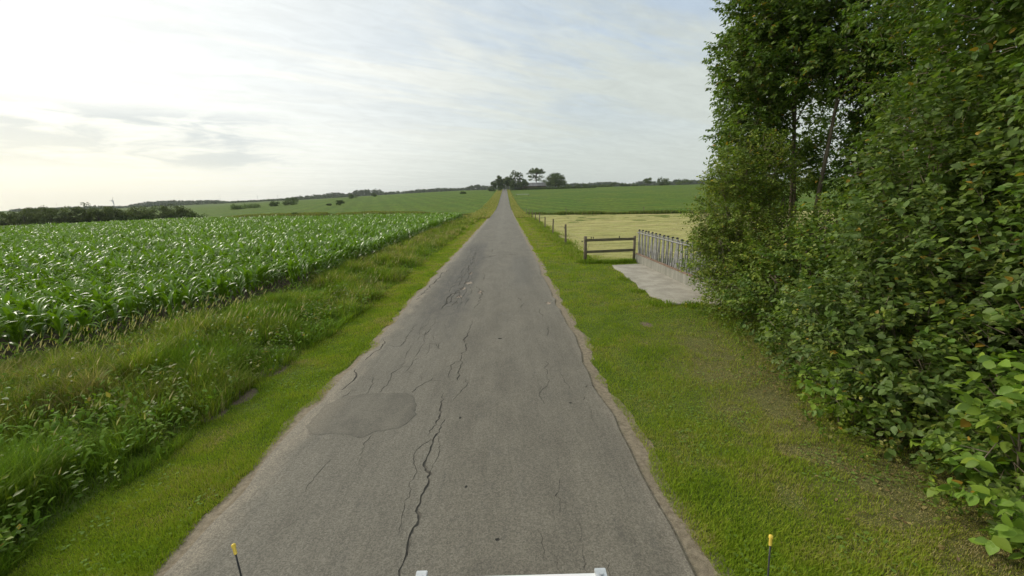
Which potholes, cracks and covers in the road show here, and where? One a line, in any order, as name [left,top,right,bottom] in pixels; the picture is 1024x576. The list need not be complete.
crack [342,249,514,576]
